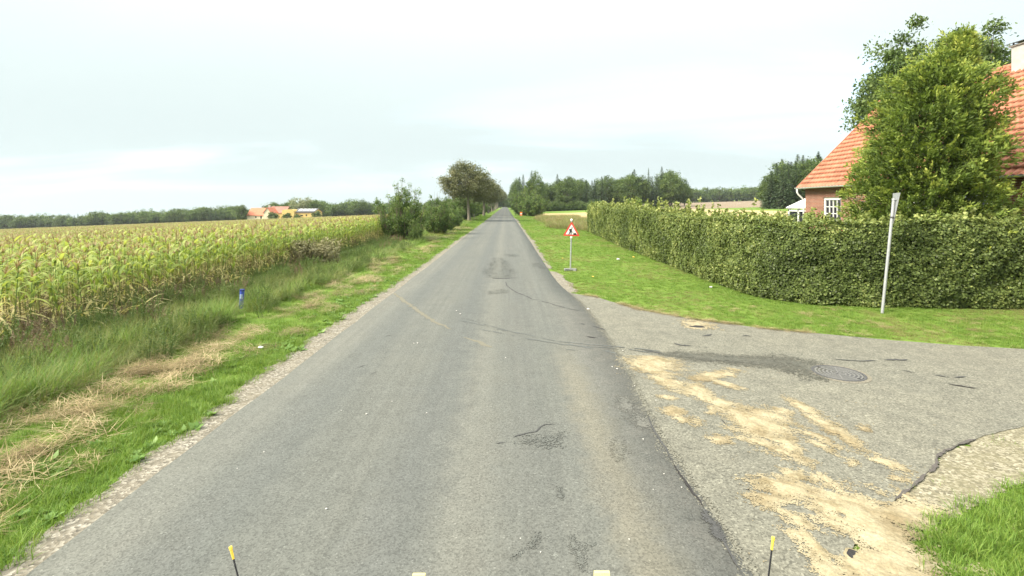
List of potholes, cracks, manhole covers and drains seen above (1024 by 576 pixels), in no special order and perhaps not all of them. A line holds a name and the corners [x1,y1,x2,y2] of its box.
pothole [843,548,861,558]
crack [838,359,911,372]
manhole cover [807,364,872,383]
crack [494,278,605,338]
